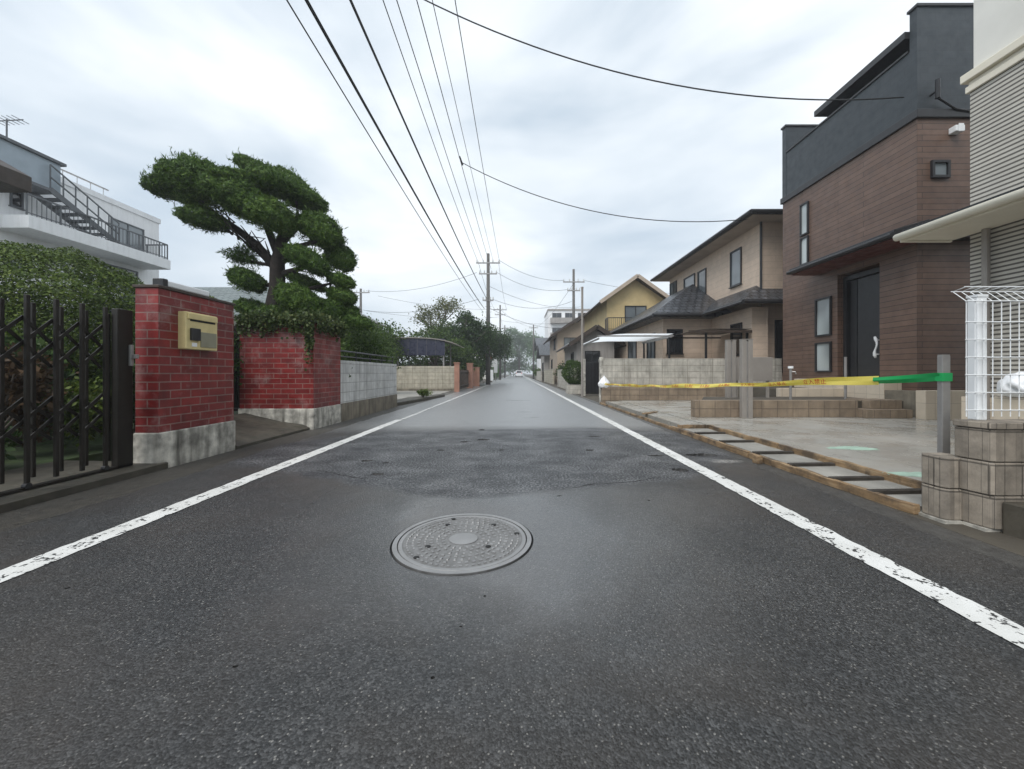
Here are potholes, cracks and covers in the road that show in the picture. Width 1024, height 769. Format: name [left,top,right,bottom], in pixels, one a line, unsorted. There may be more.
manhole cover [390,513,533,576]
